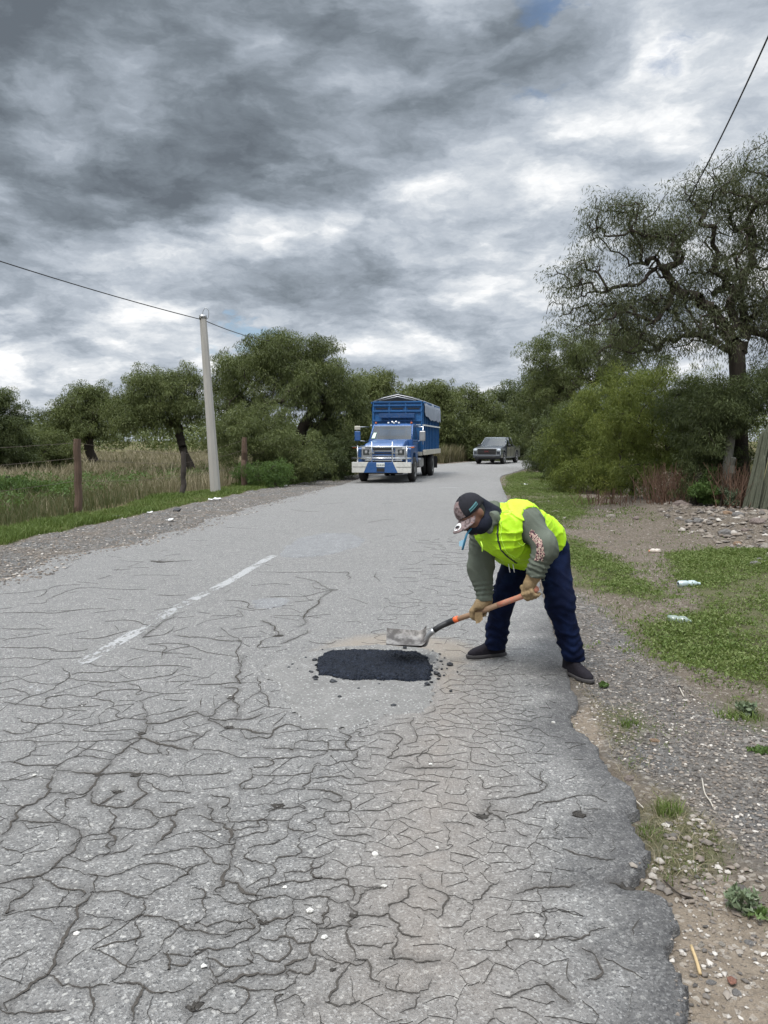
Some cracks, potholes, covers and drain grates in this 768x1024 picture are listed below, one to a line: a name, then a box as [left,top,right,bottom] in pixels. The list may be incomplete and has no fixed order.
crack [0,535,643,1024]
